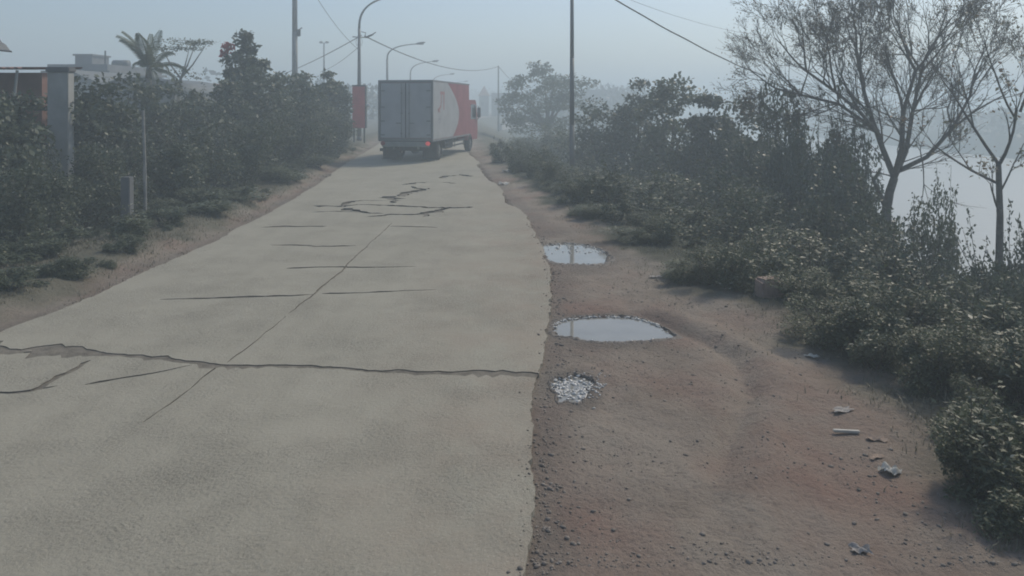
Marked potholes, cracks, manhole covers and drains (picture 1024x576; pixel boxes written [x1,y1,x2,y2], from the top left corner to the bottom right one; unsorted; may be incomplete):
crack [0,174,539,422]
pothole [547,371,607,409]
pothole [547,313,683,344]
pothole [541,242,616,266]
